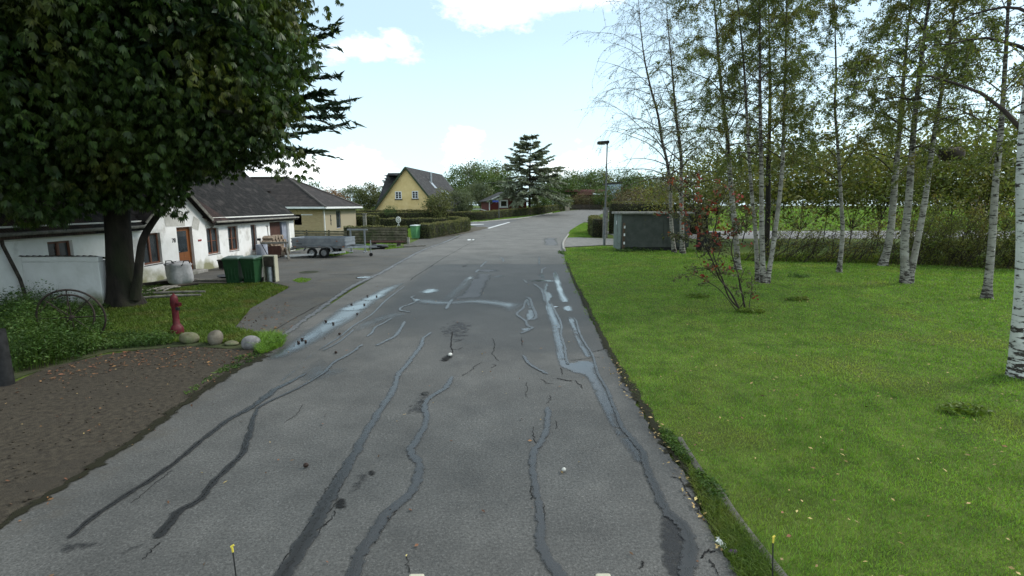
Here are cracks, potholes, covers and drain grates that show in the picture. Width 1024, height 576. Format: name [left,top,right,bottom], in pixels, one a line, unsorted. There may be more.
crack [696,546,719,575]
